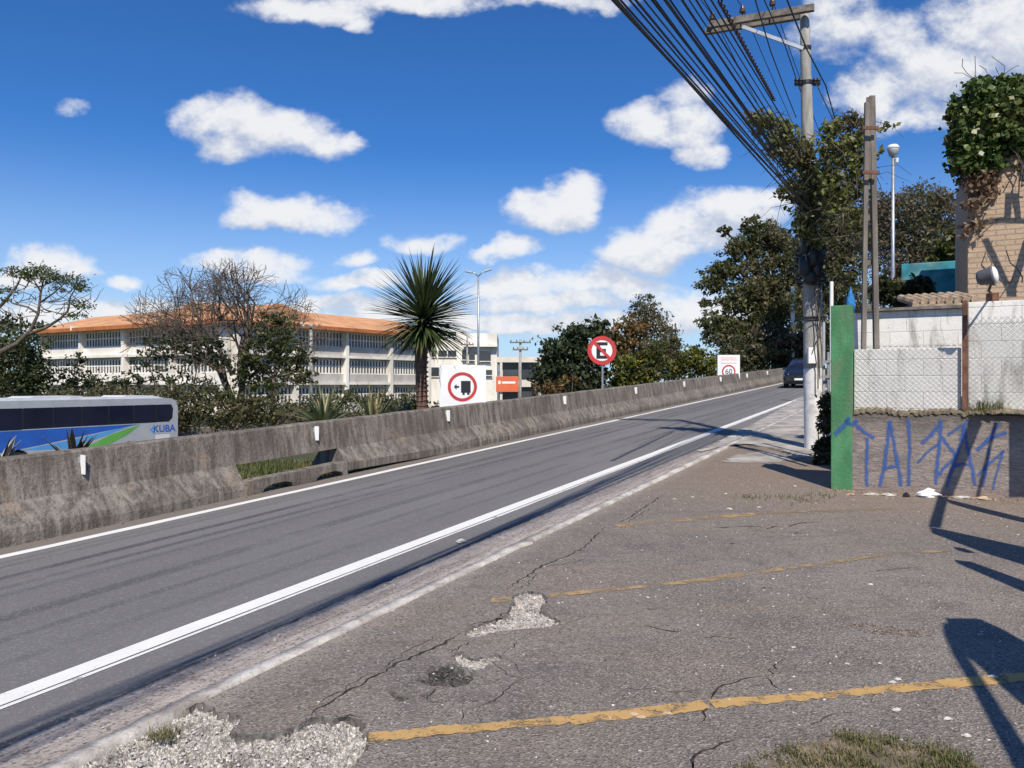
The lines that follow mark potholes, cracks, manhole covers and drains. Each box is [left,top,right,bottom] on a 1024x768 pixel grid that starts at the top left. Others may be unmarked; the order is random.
pothole [416,664,474,688]
pothole [461,591,562,637]
crack [311,611,594,725]
crack [622,658,786,768]
crack [507,494,664,590]
pothole [80,702,372,768]
pothole [451,651,502,670]
